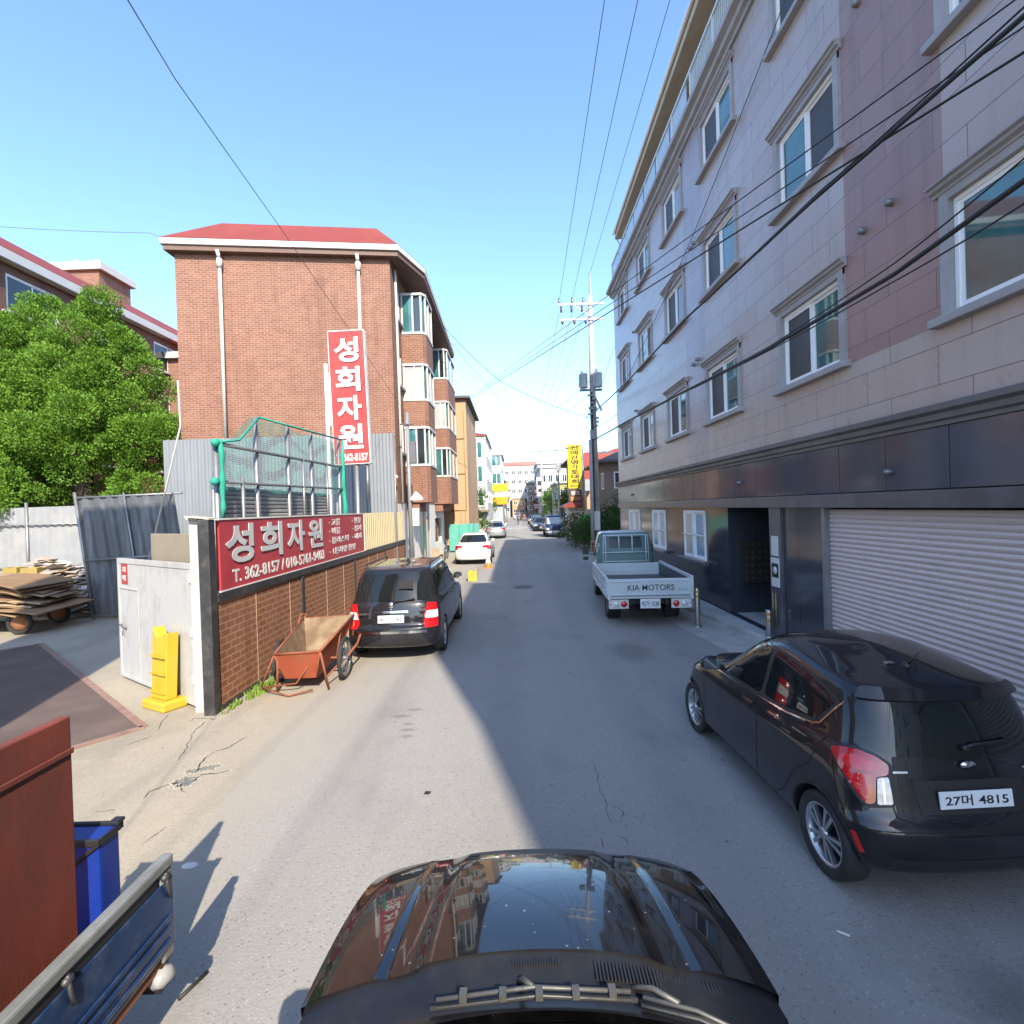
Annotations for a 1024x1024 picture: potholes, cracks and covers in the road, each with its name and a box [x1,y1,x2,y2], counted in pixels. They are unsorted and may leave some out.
pothole [167,774,202,789]
crack [594,765,645,849]
crack [174,718,214,763]
pothole [179,762,226,775]
